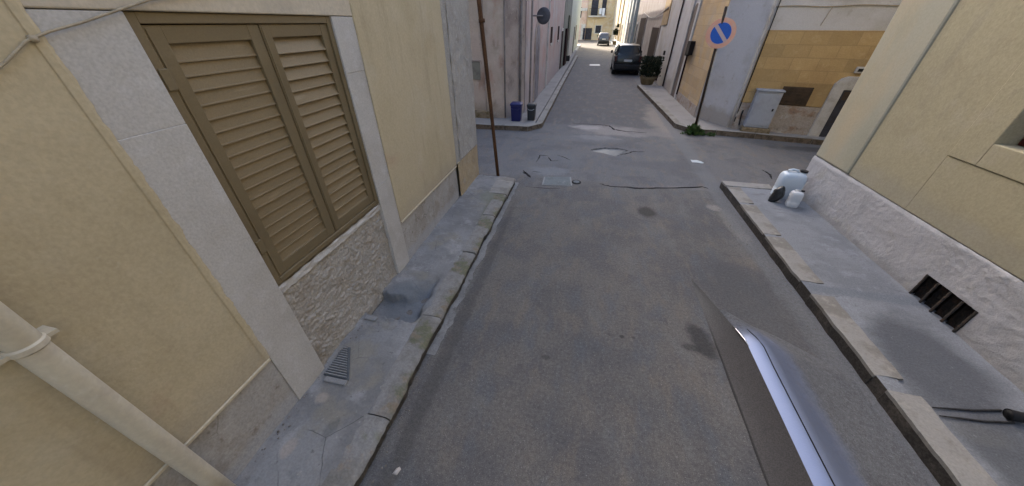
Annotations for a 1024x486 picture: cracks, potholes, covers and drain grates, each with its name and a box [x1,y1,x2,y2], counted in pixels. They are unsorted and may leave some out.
manhole cover [542,177,572,186]
pothole [592,147,628,156]
